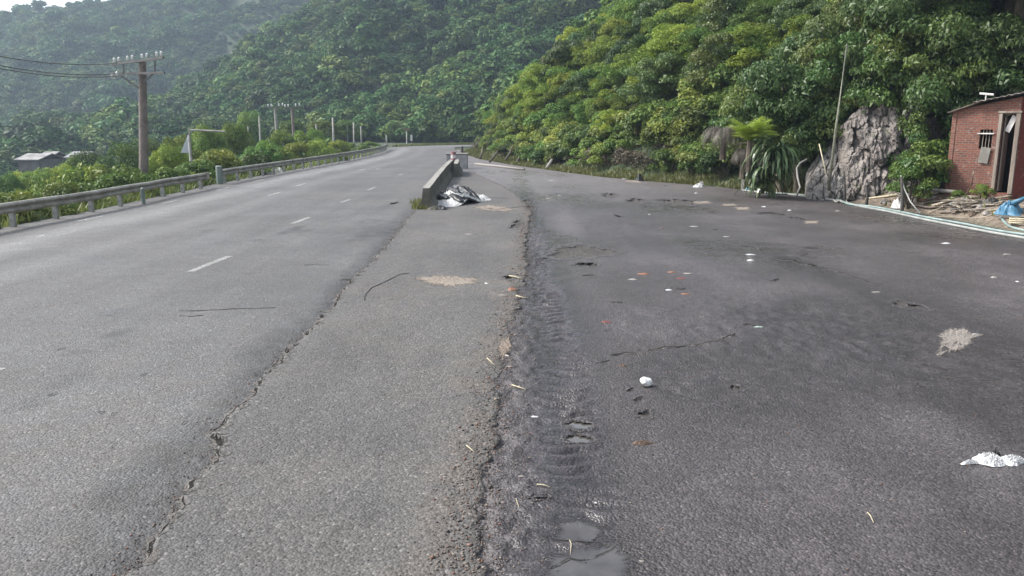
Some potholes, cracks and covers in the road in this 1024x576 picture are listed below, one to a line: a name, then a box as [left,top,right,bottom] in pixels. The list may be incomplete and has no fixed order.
pothole [559,418,597,432]
crack [177,307,275,316]
crack [270,343,300,371]
crack [596,323,757,362]
pothole [559,433,598,444]
pothole [885,299,935,311]
crack [742,246,877,285]
crack [204,395,253,435]
